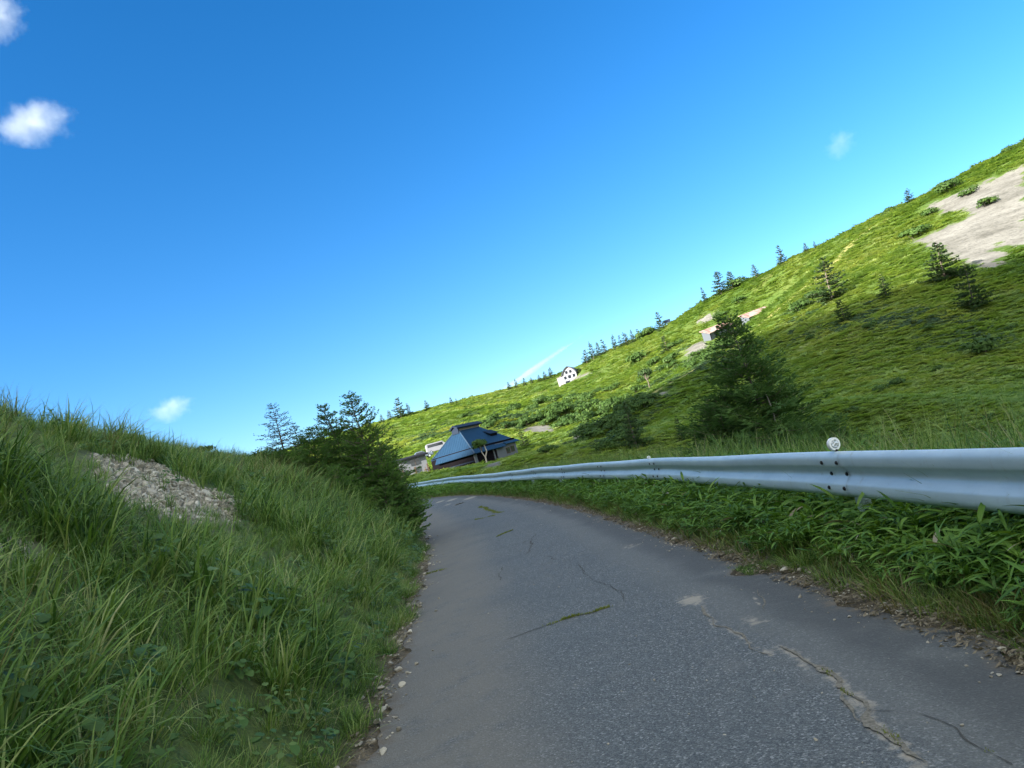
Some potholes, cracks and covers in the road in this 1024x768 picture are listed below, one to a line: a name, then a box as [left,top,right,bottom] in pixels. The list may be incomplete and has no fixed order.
crack [701,605,1012,764]
crack [475,505,552,559]
crack [511,565,624,638]
